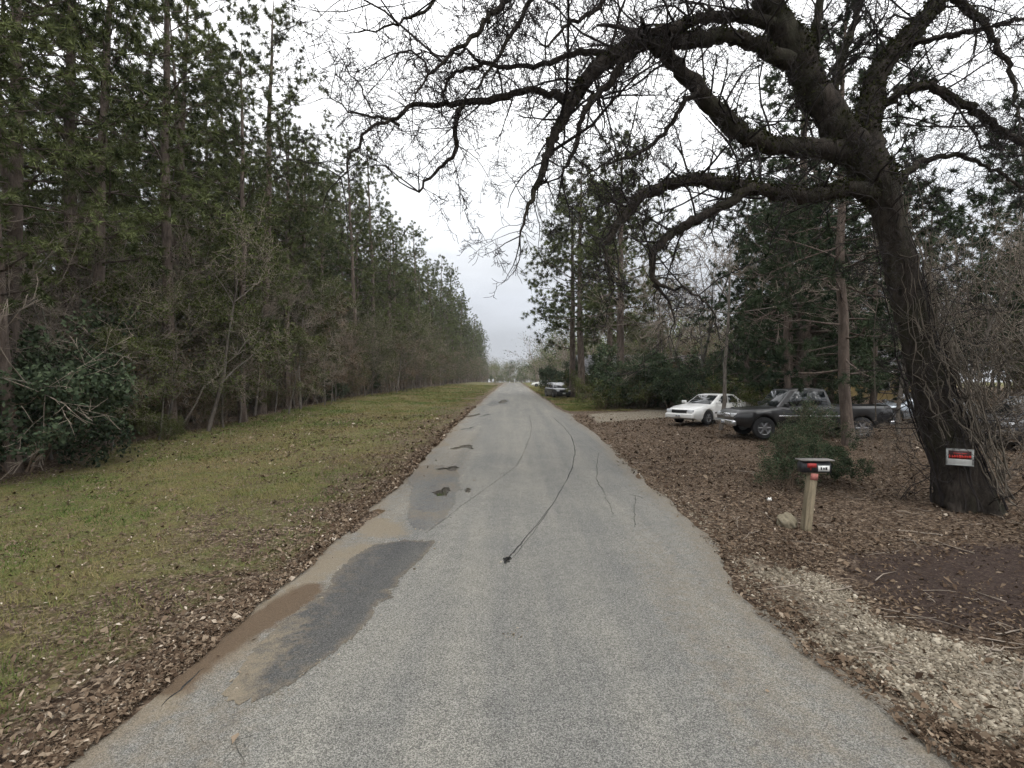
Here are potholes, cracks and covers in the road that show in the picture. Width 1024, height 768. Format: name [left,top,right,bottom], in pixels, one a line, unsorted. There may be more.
crack [596,453,613,515]
